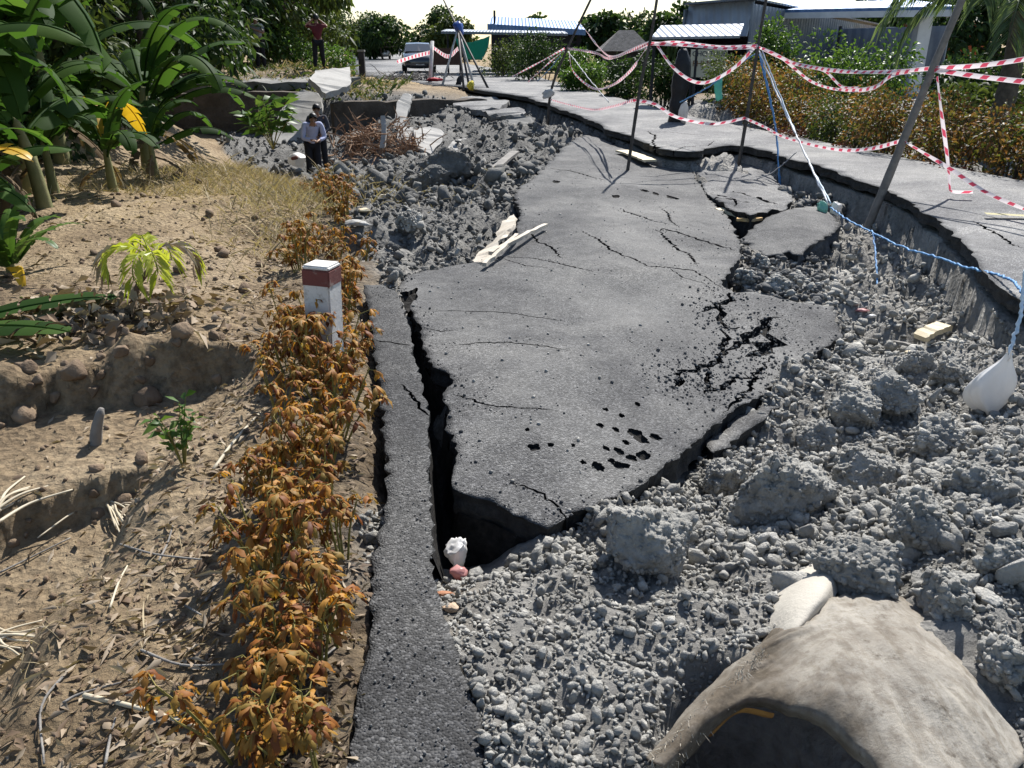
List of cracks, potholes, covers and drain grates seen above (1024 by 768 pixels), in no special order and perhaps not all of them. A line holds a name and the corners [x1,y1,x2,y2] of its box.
crack [706,191,778,207]
crack [374,310,568,580]
crack [973,221,1022,248]
crack [503,229,593,272]
crack [582,208,787,412]
pothole [607,428,663,469]
